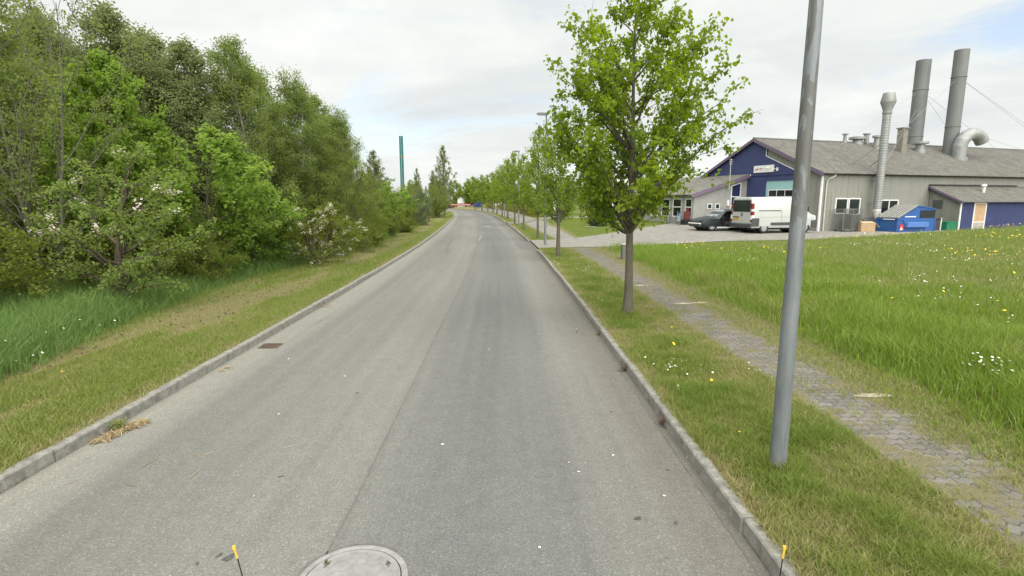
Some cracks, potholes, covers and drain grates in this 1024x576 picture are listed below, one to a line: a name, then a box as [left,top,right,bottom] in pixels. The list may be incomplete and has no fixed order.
manhole cover [300,545,408,576]
